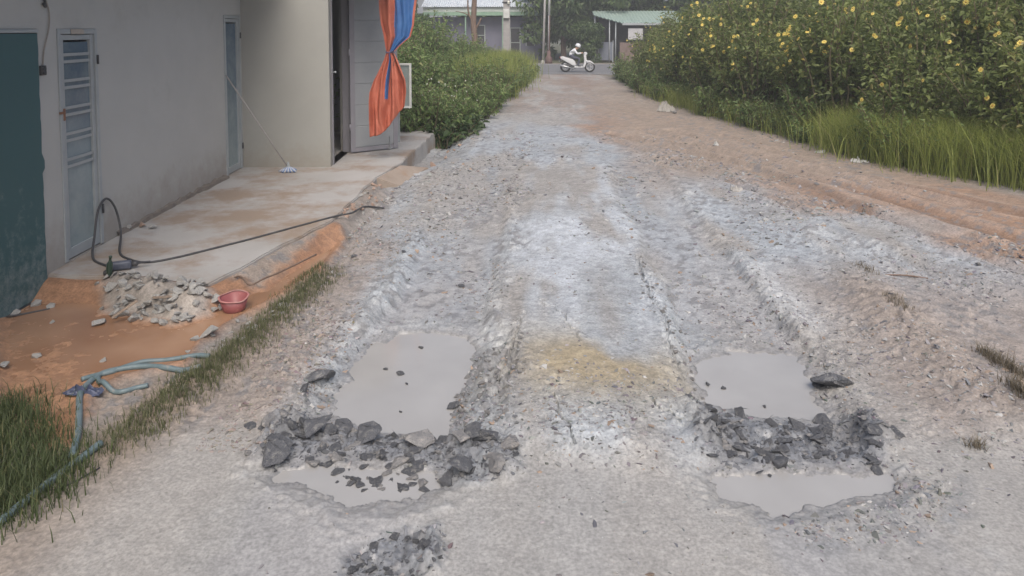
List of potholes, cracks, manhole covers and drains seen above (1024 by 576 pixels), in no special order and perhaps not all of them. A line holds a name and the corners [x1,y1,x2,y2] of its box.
pothole [231,438,479,530]
pothole [671,337,856,433]
pothole [682,440,934,529]
pothole [301,318,505,446]
